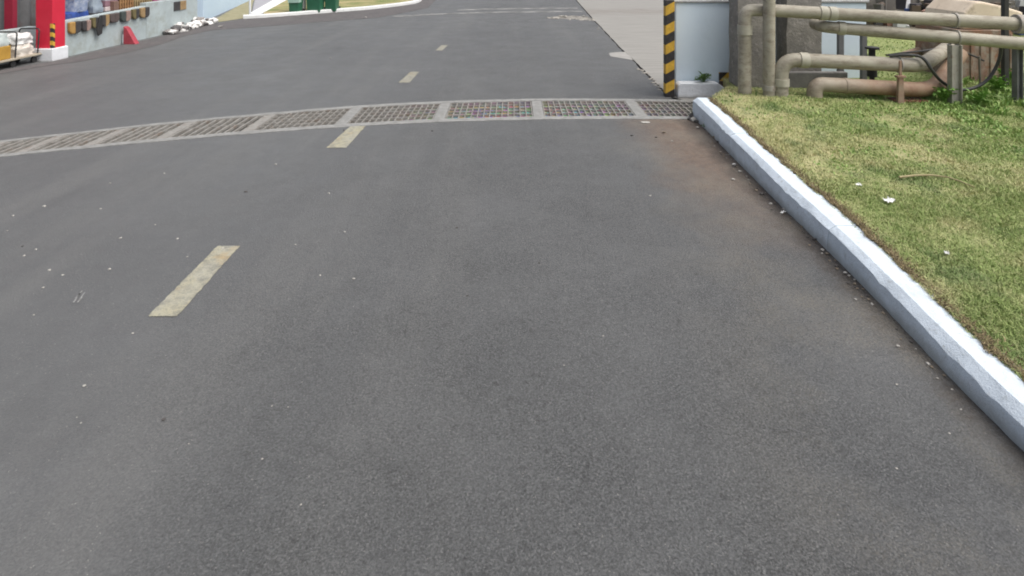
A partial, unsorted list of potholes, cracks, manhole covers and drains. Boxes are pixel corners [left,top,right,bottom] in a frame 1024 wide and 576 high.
drain grate [255,108,352,130]
drain grate [635,101,693,116]
drain grate [542,101,635,116]
drain grate [168,115,266,138]
drain grate [0,136,56,154]
drain grate [95,122,188,145]
drain grate [445,101,533,119]
drain grate [347,104,440,124]
drain grate [30,129,120,151]
